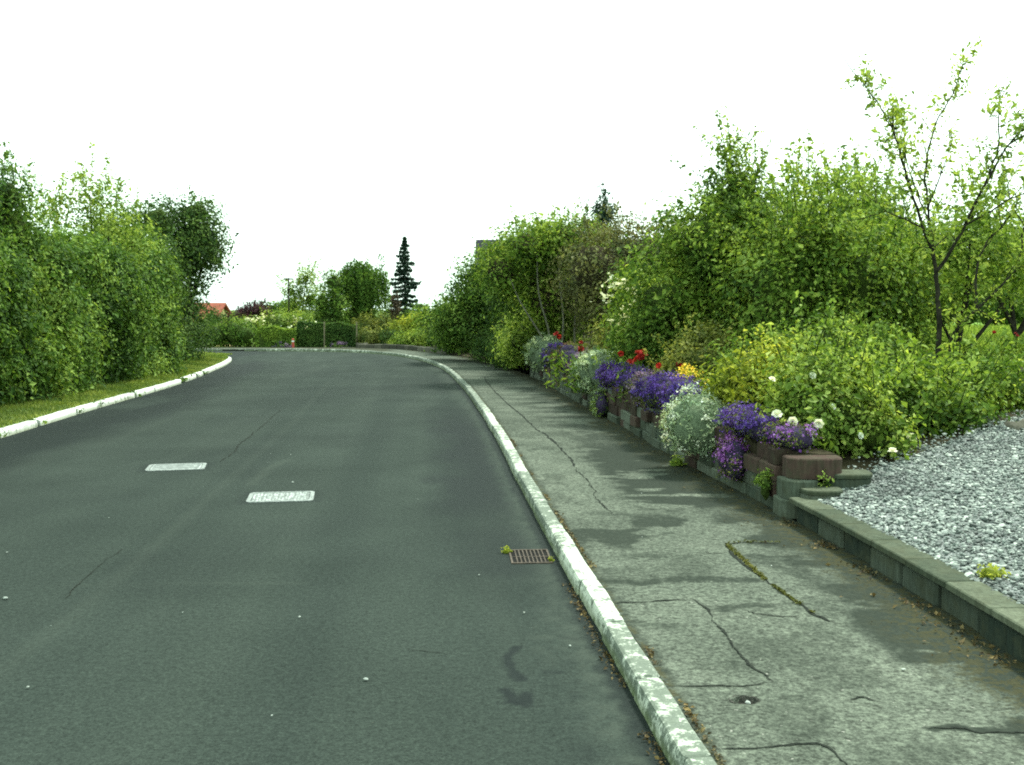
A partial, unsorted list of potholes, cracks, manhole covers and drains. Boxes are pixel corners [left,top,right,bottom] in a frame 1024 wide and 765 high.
pothole [729,695,760,704]
crack [715,742,848,765]
crack [613,539,830,686]
crack [925,708,1024,733]
drain grate [509,549,553,564]
